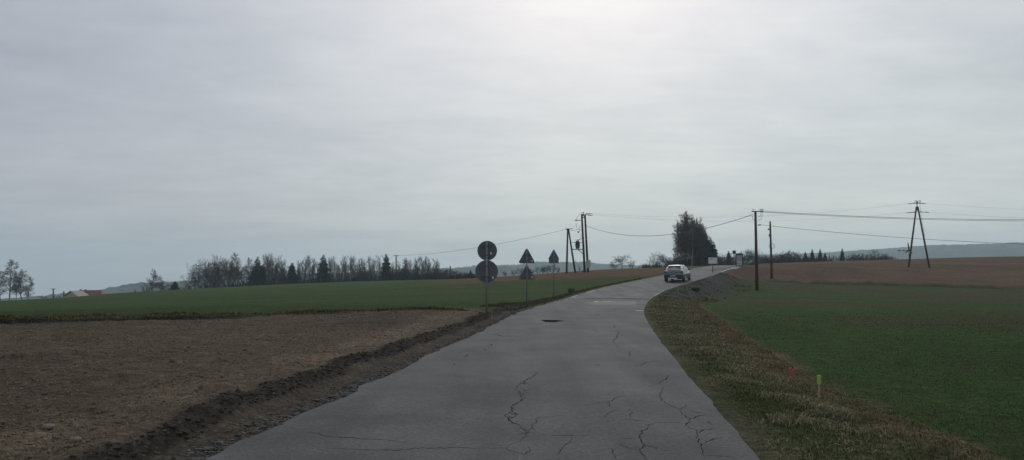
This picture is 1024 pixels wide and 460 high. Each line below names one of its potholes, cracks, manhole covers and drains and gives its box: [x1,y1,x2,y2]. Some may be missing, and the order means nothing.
crack [309,373,591,455]
crack [589,314,735,460]
